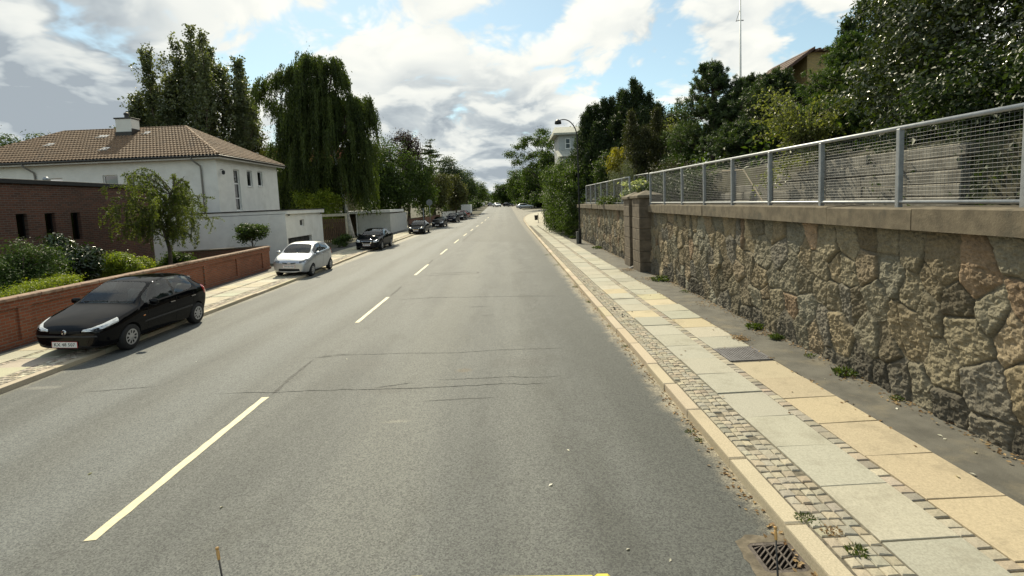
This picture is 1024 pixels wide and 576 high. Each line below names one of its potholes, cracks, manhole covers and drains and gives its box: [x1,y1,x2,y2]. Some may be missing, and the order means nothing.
manhole cover [712,346,773,362]
drain grate [735,533,816,576]
